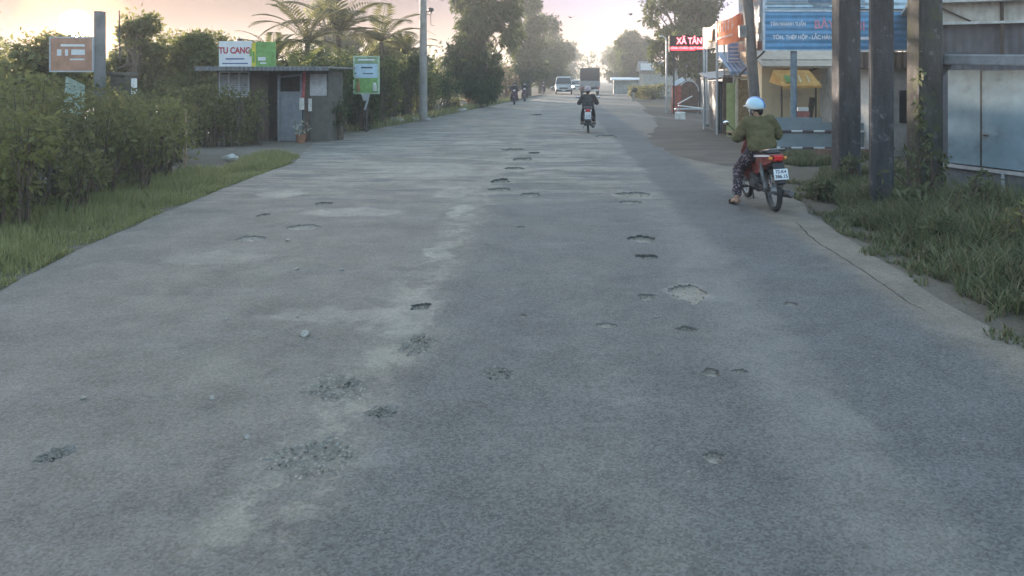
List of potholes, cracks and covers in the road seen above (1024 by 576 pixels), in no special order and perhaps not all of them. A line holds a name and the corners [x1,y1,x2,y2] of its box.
pothole [257,434,364,485]
pothole [702,451,725,464]
pothole [668,284,707,305]
pothole [299,373,374,403]
pothole [627,235,655,243]
pothole [31,445,79,464]
pothole [363,404,402,419]
pothole [398,332,439,357]
pothole [479,365,517,382]
pothole [410,303,432,311]
pothole [701,367,721,377]
